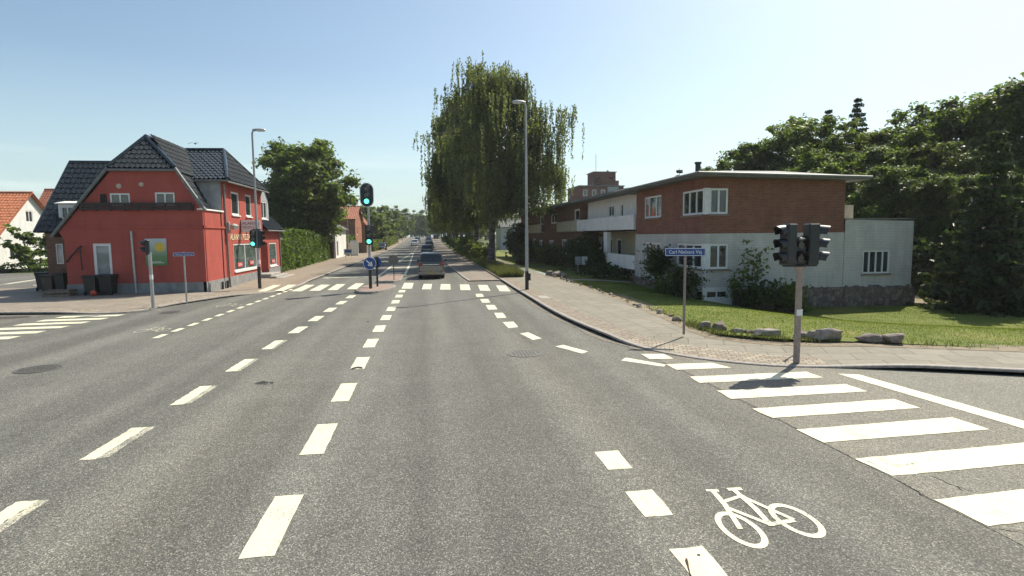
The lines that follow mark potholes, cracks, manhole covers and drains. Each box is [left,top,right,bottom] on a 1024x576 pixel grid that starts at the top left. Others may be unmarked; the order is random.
manhole cover [12,364,63,374]
